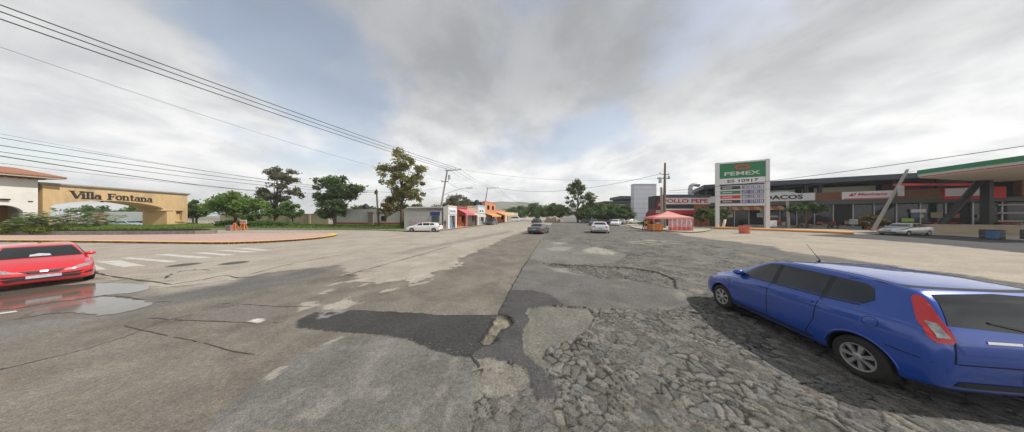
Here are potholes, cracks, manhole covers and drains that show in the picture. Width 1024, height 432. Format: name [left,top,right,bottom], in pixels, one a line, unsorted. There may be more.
pothole [481,315,513,345]
pothole [543,263,677,289]
pothole [521,305,595,368]
